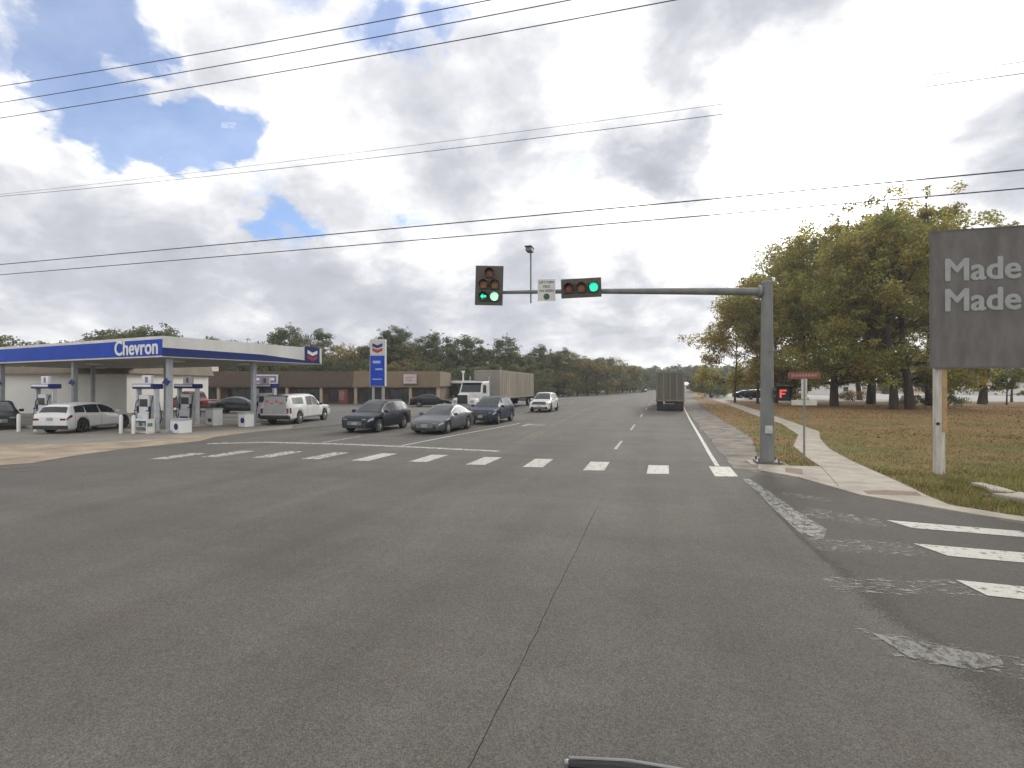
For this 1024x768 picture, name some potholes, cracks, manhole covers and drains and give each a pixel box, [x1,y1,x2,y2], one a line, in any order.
crack [468,501,601,768]
